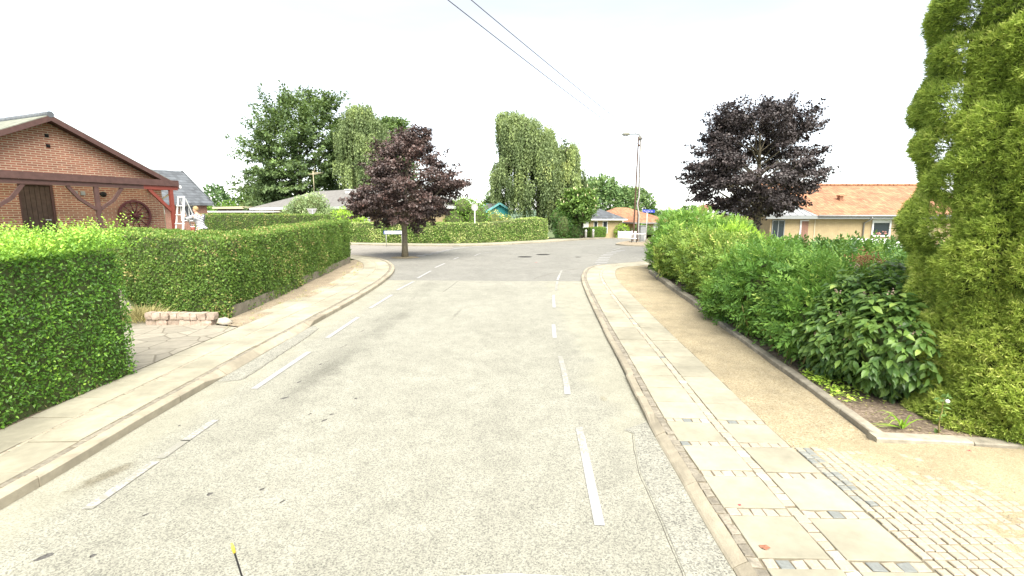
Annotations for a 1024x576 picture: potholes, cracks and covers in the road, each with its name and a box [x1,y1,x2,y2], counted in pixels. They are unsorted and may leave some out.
crack [625,428,683,576]
